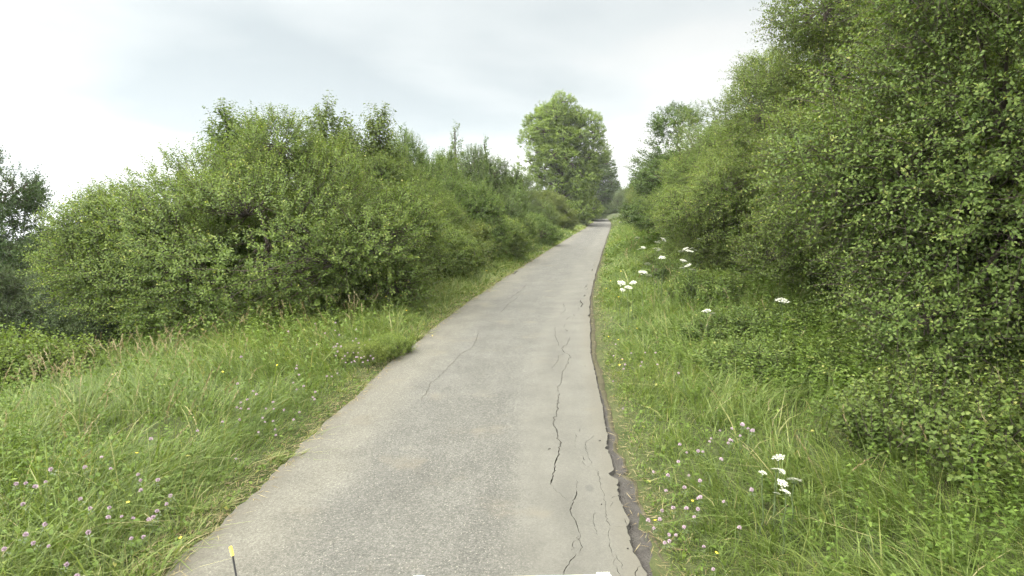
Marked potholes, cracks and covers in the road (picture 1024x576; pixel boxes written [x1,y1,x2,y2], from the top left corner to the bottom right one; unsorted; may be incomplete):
crack [550,265,641,576]
